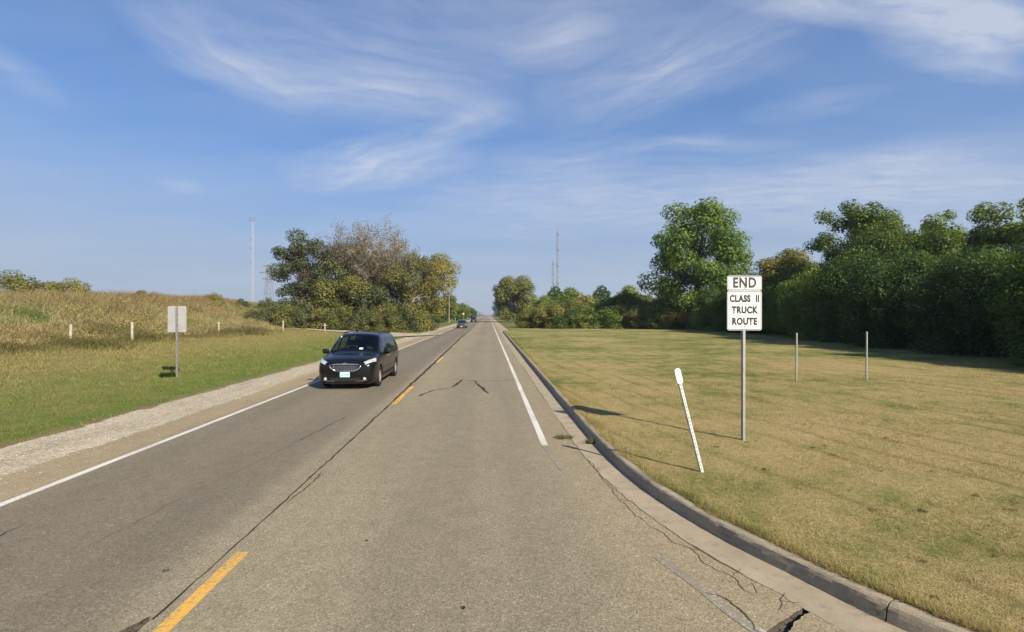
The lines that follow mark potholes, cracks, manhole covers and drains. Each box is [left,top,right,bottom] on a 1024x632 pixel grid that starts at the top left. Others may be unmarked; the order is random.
pothole [766,608,809,632]
